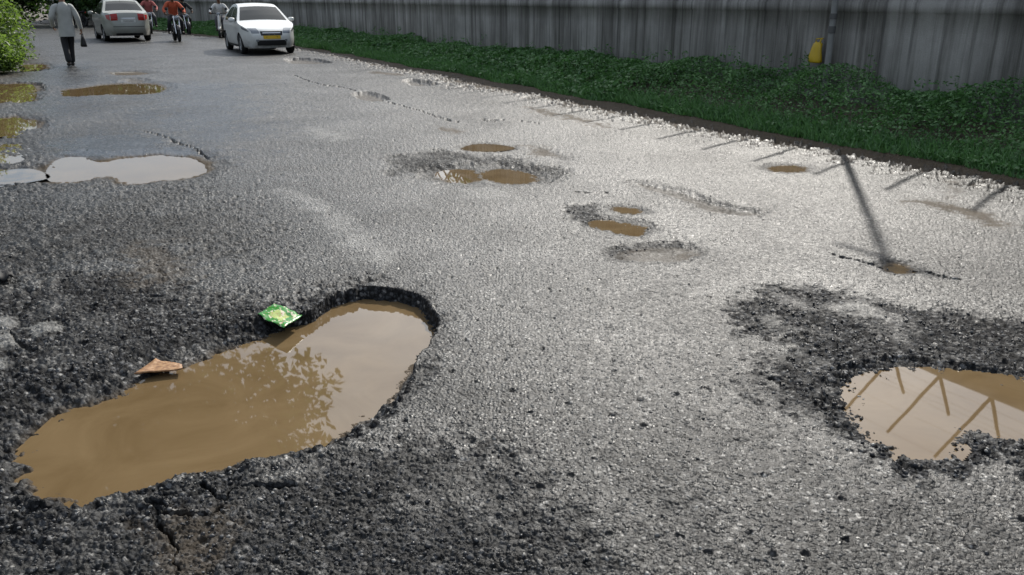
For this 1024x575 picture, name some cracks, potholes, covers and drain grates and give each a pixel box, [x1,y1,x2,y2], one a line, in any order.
pothole [752,160,823,175]
crack [142,130,210,160]
pothole [811,352,1024,480]
crack [141,478,301,575]
pothole [21,145,243,191]
pothole [450,141,523,154]
crack [290,75,356,92]
pothole [597,240,710,265]
pothole [407,159,574,187]
pothole [0,163,51,190]
pothole [578,214,666,239]
pothole [621,179,773,217]
